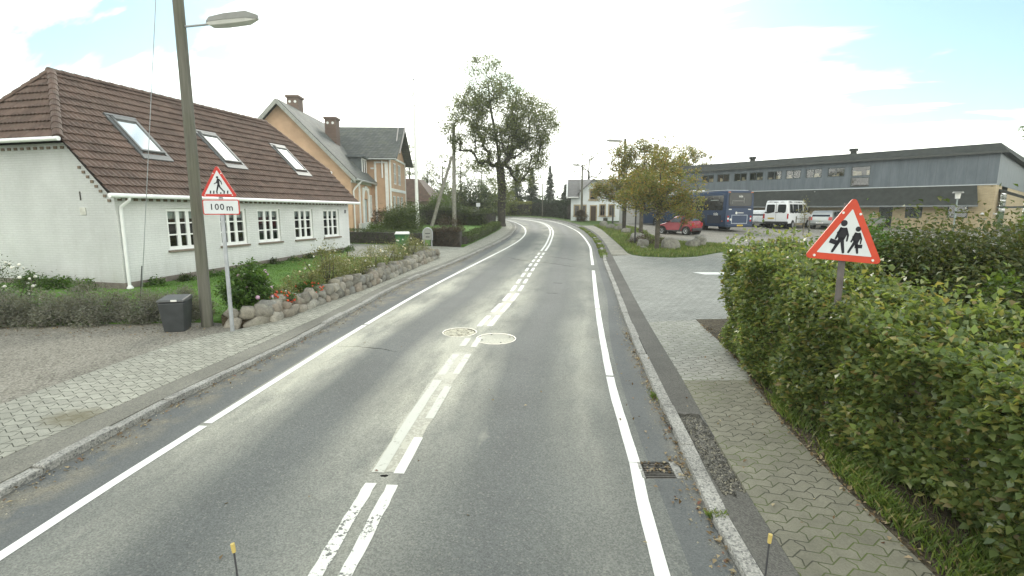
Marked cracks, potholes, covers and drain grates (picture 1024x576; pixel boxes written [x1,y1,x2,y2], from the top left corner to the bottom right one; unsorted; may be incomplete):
manhole cover [442,328,477,337]
drain grate [637,462,685,479]
manhole cover [476,333,516,344]
